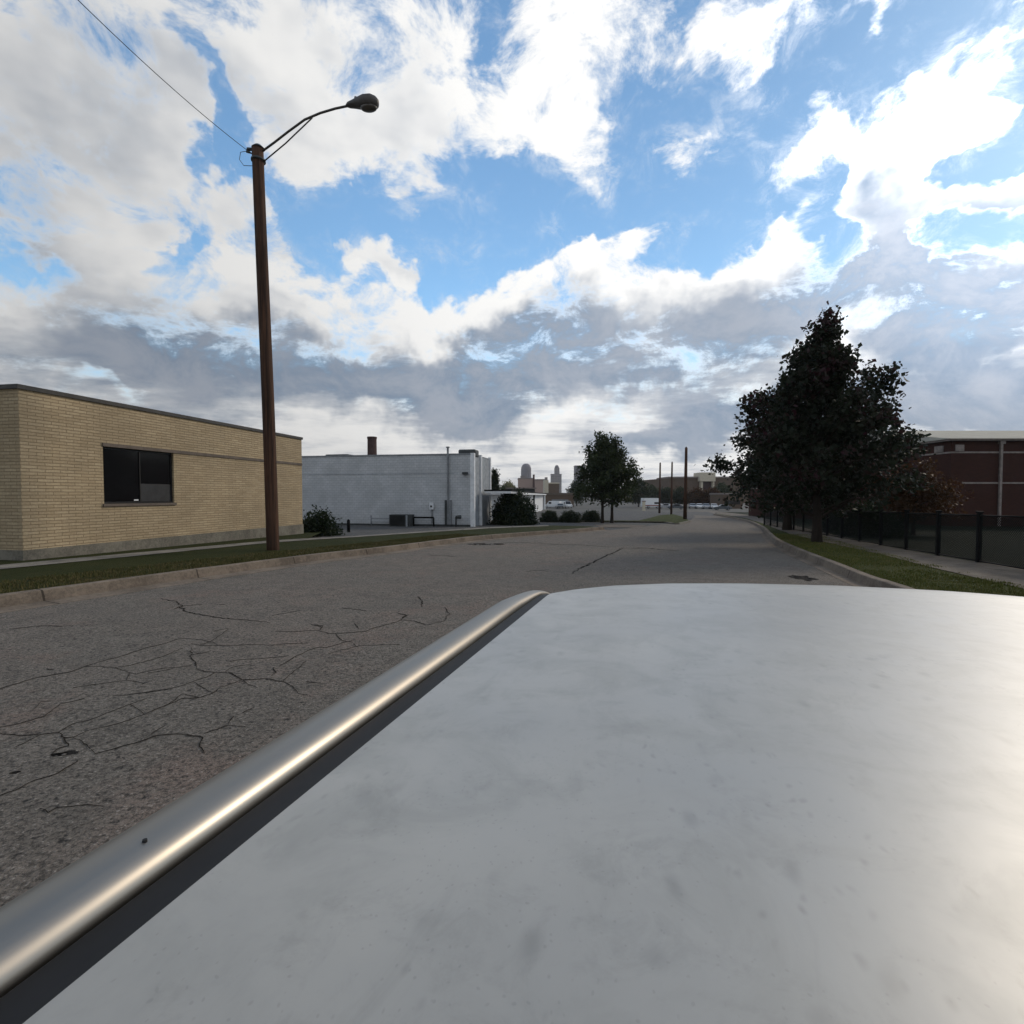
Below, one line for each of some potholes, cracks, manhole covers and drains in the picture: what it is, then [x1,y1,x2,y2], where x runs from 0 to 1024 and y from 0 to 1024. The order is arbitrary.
crack [0,698,254,795]
crack [40,804,104,813]
crack [0,597,450,738]
